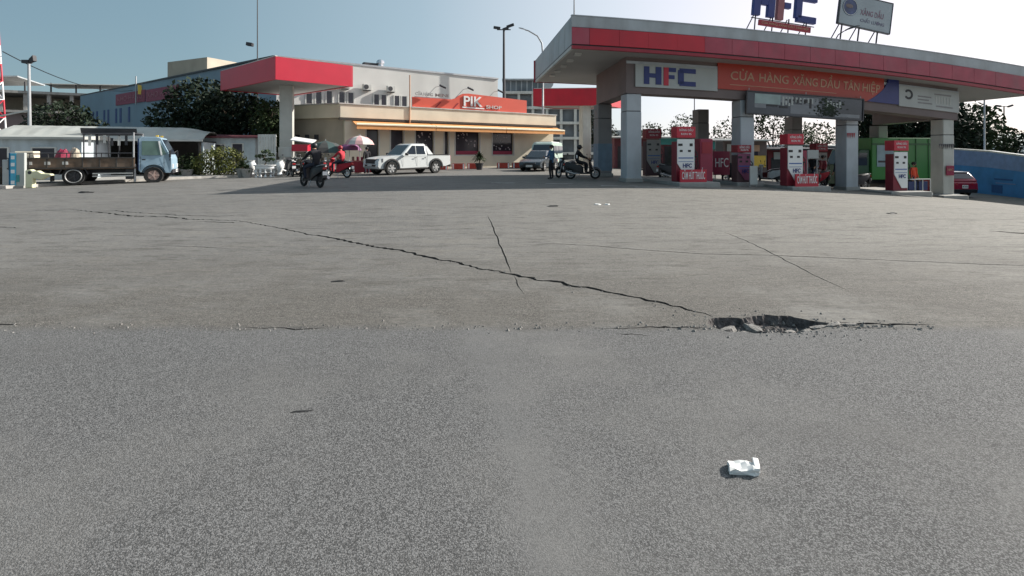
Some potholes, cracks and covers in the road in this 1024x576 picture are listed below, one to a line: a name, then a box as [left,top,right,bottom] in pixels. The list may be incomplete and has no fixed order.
pothole [708,315,828,333]
crack [80,210,710,336]
